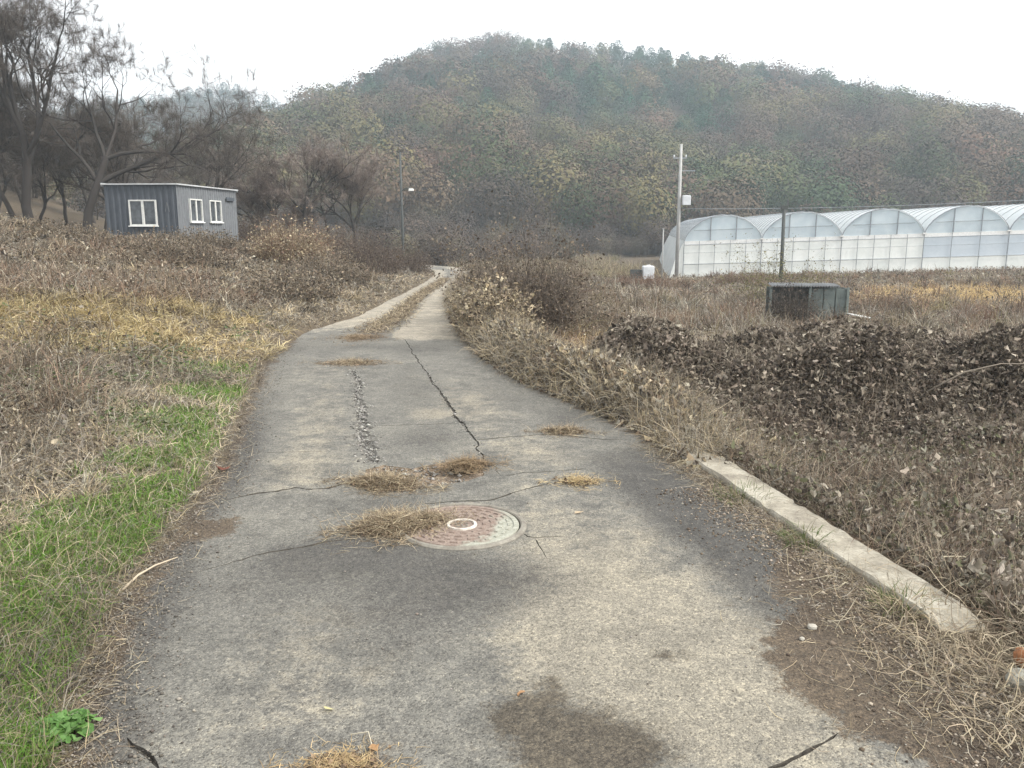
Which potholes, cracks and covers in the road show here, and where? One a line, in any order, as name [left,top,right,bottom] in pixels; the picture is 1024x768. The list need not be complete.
manhole cover [398,503,527,551]
crack [203,539,351,571]
crack [221,482,349,501]
crack [339,337,614,504]
